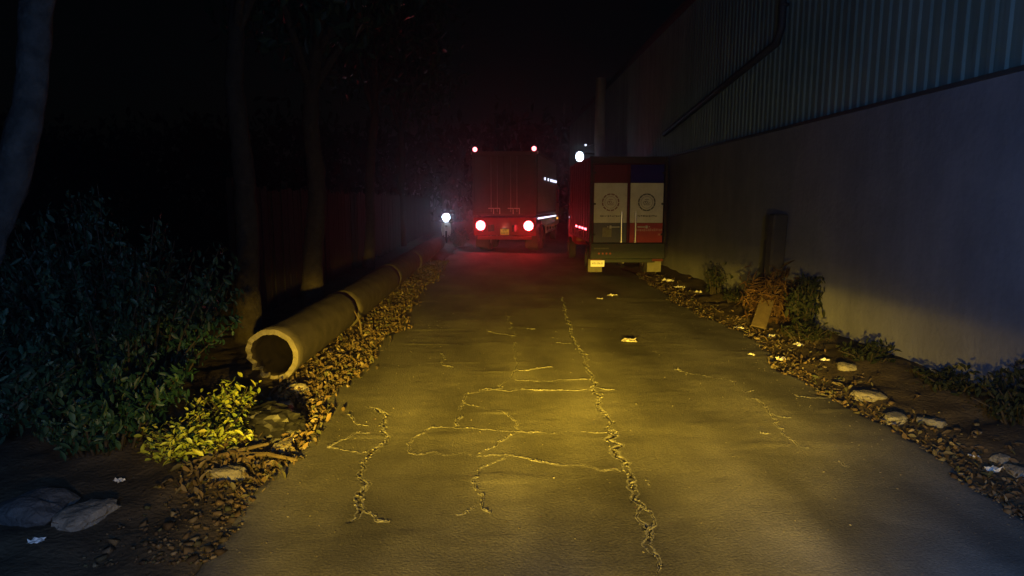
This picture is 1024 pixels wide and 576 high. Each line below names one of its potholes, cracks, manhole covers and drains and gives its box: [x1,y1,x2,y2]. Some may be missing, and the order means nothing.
crack [327,297,835,573]
